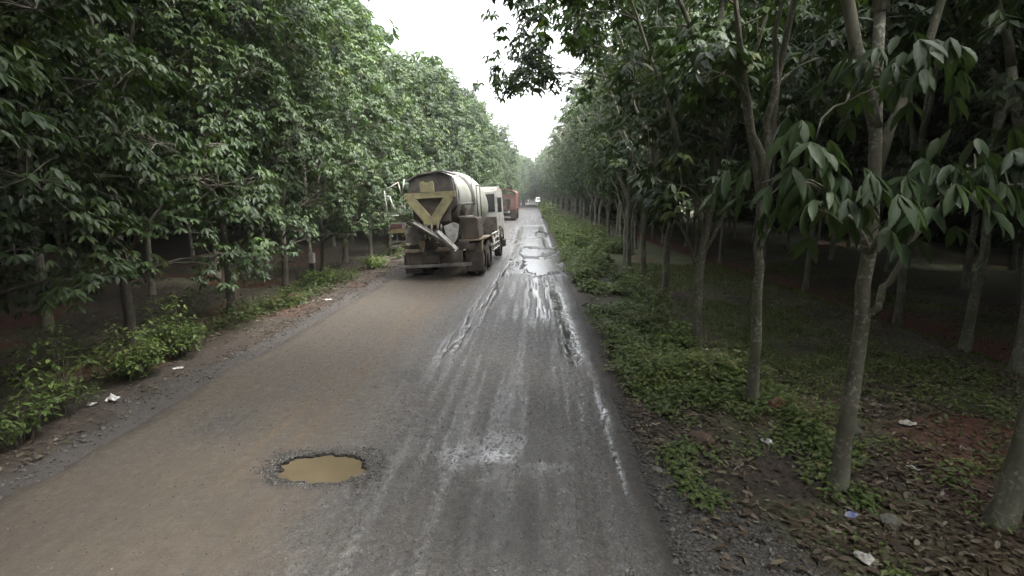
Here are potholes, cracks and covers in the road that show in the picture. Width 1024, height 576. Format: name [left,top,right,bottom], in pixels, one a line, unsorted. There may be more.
pothole [249,442,407,499]
